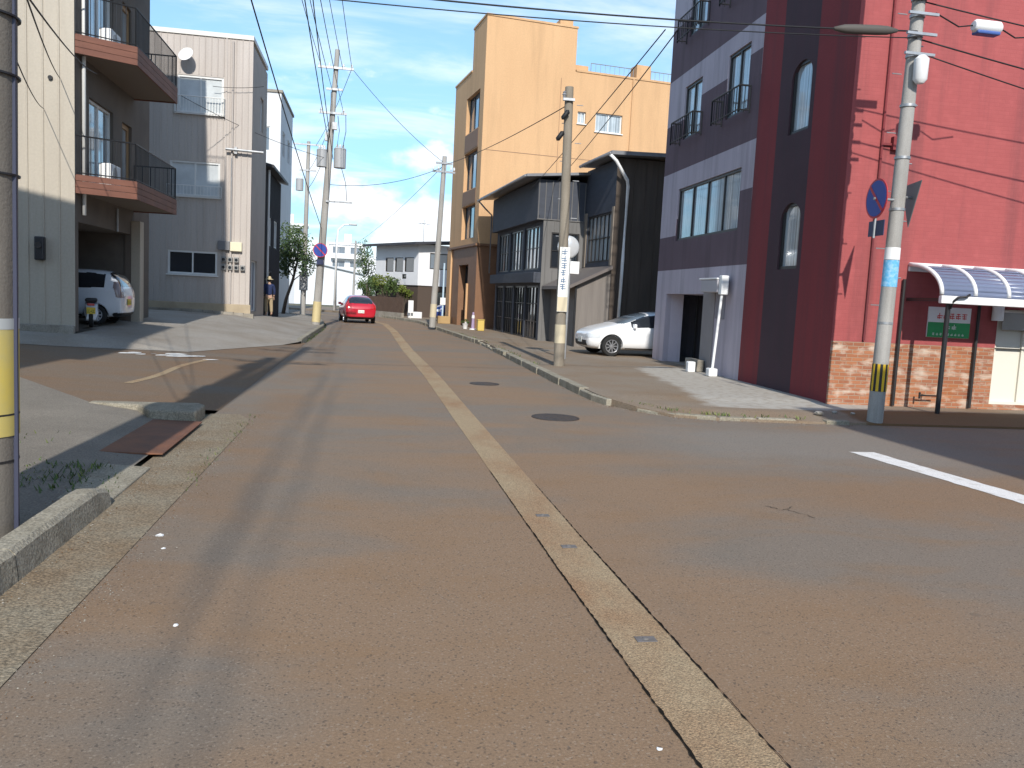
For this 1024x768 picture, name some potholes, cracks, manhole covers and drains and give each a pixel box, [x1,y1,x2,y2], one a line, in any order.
manhole cover [532,413,579,421]
